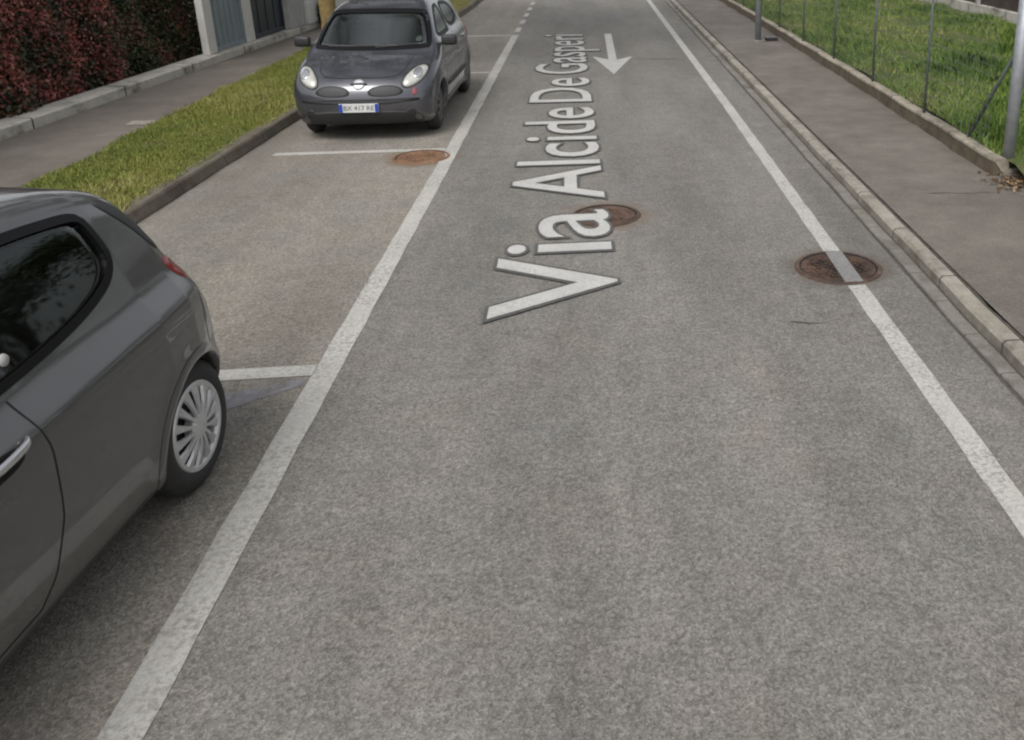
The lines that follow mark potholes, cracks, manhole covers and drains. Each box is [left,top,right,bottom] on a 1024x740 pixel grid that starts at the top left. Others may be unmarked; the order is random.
manhole cover [392,150,450,165]
manhole cover [573,204,641,227]
manhole cover [794,251,883,285]
